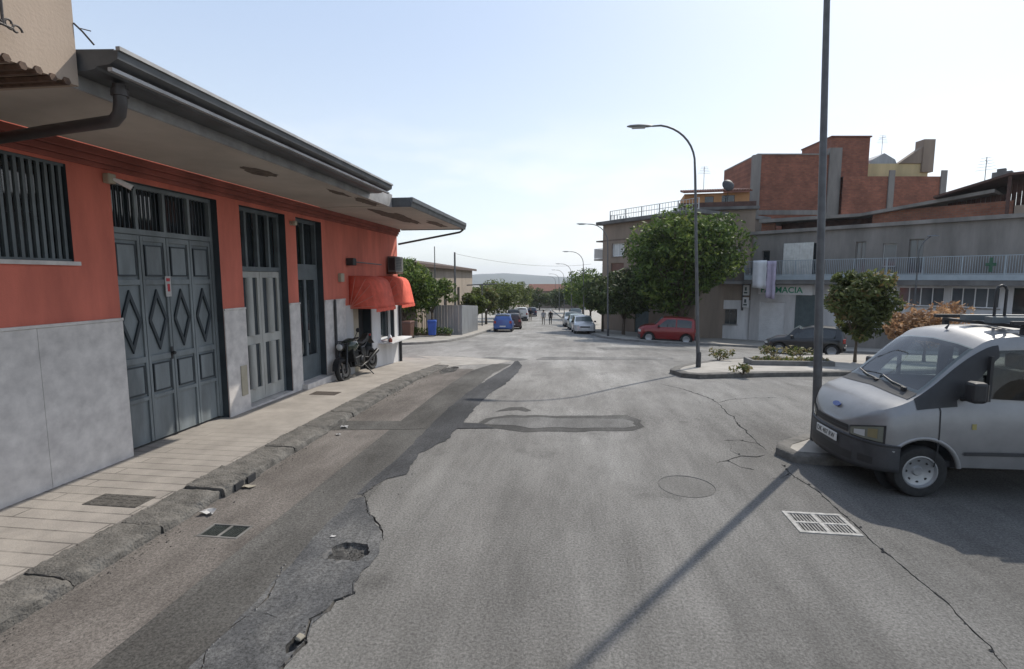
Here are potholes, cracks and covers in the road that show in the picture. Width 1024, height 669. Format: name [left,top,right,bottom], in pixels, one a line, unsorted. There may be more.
crack [774,465,1007,669]
pothole [322,543,370,564]
crack [362,487,384,540]
manhole cover [82,493,156,508]
crack [663,384,769,470]
drain grate [781,511,864,537]
drain grate [196,523,253,539]
manhole cover [658,475,716,498]
